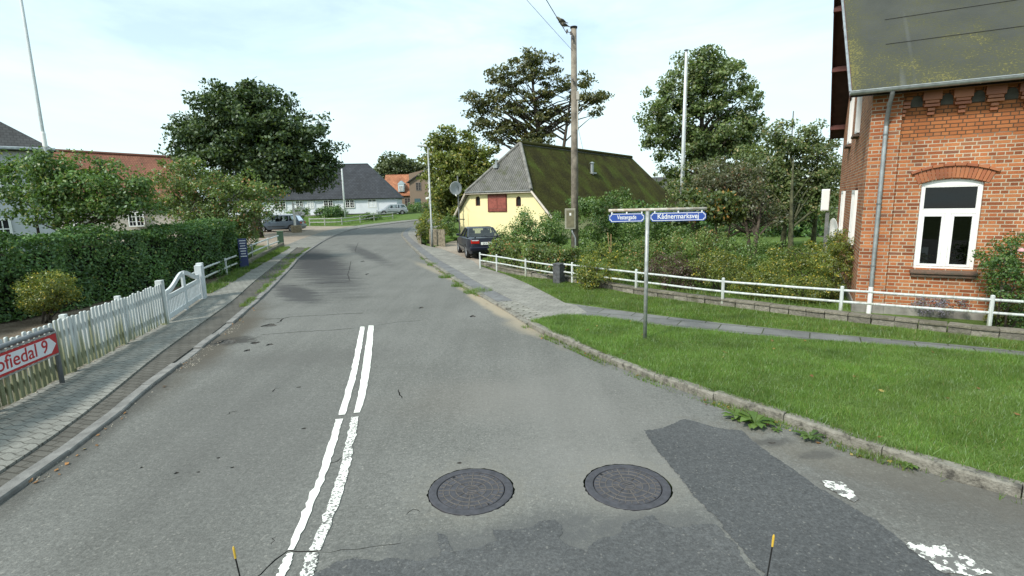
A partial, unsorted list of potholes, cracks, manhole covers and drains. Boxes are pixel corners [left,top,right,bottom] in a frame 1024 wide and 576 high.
crack [259,536,400,576]
manhole cover [585,464,671,511]
manhole cover [428,469,514,516]
